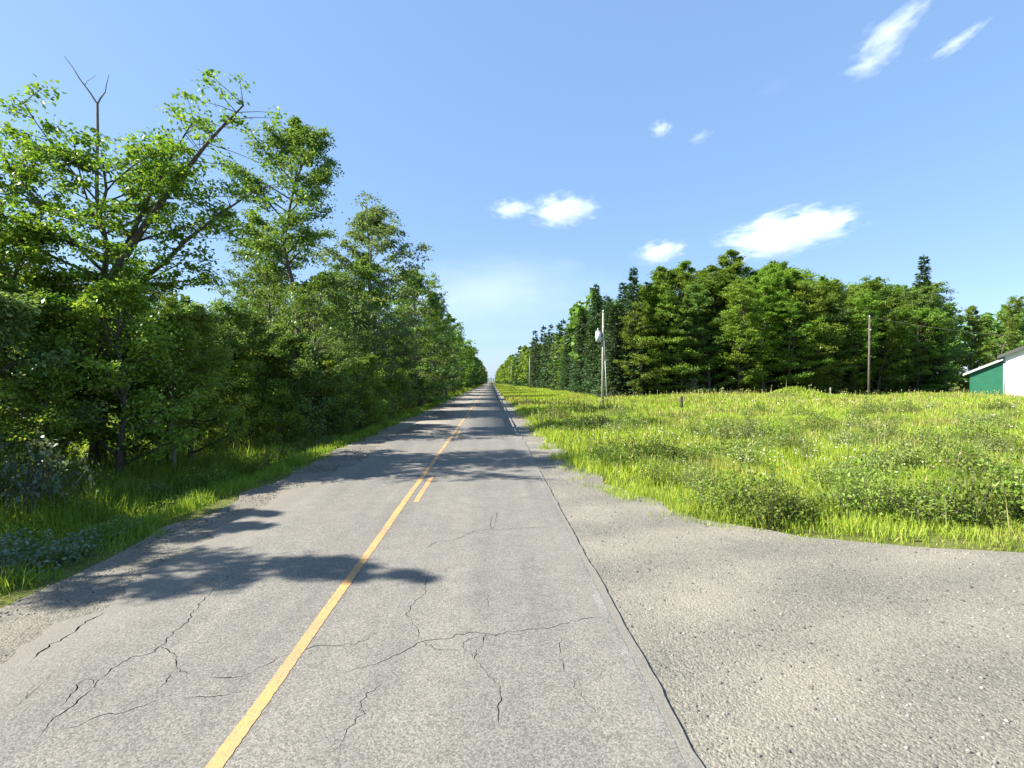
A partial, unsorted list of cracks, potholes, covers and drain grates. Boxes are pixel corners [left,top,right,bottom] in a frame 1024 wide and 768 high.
crack [340,579,604,725]
crack [17,573,379,745]
